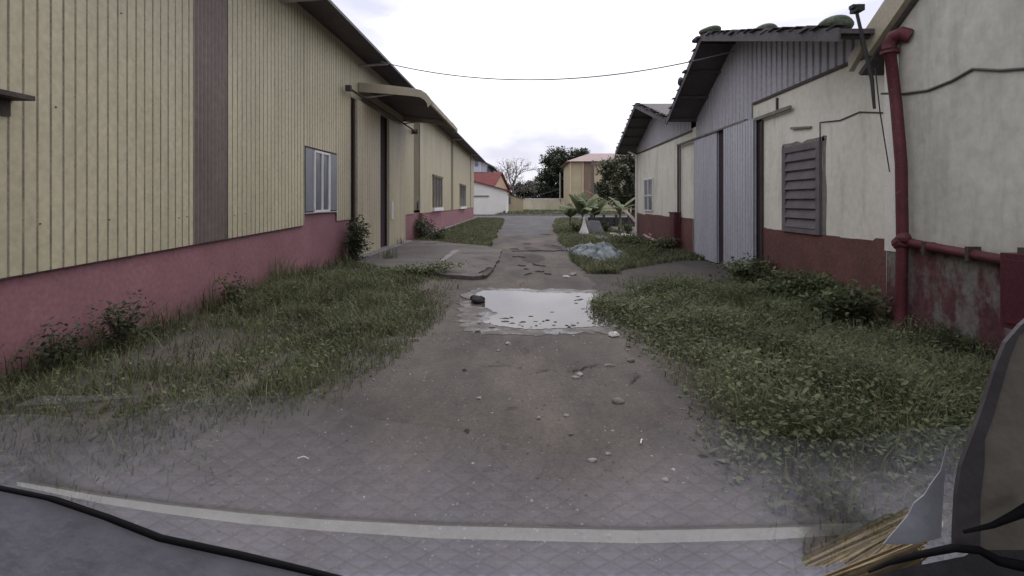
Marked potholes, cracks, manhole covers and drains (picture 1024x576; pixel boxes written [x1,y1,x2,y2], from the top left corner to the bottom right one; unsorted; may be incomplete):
pothole [455,287,621,336]
pothole [522,254,545,262]
